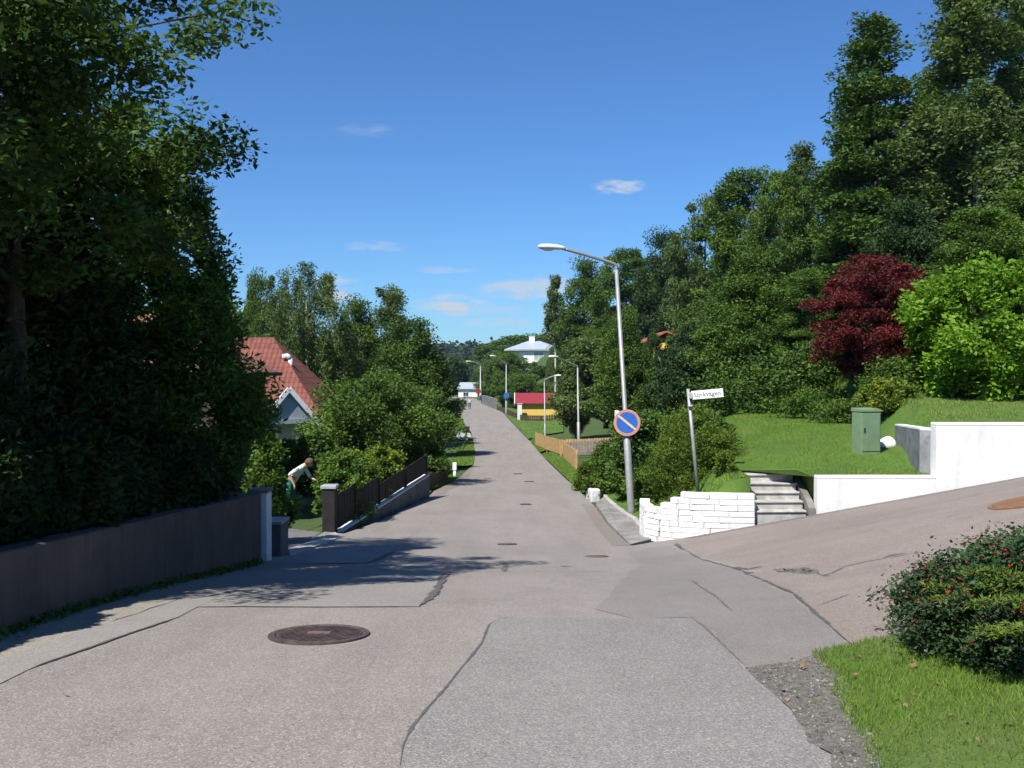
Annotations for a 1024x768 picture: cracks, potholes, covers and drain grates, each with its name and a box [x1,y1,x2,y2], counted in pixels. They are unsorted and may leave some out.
crack [691,581,743,663]
manhole cover [268,624,370,646]
crack [817,553,907,576]
